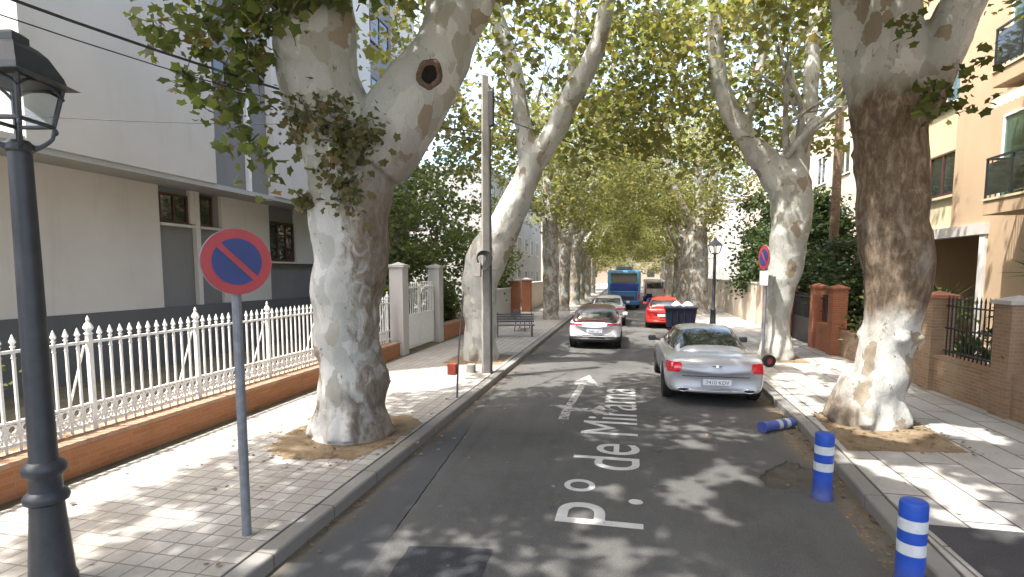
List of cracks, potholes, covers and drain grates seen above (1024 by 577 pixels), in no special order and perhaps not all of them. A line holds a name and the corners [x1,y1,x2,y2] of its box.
pothole [759,460,813,490]
